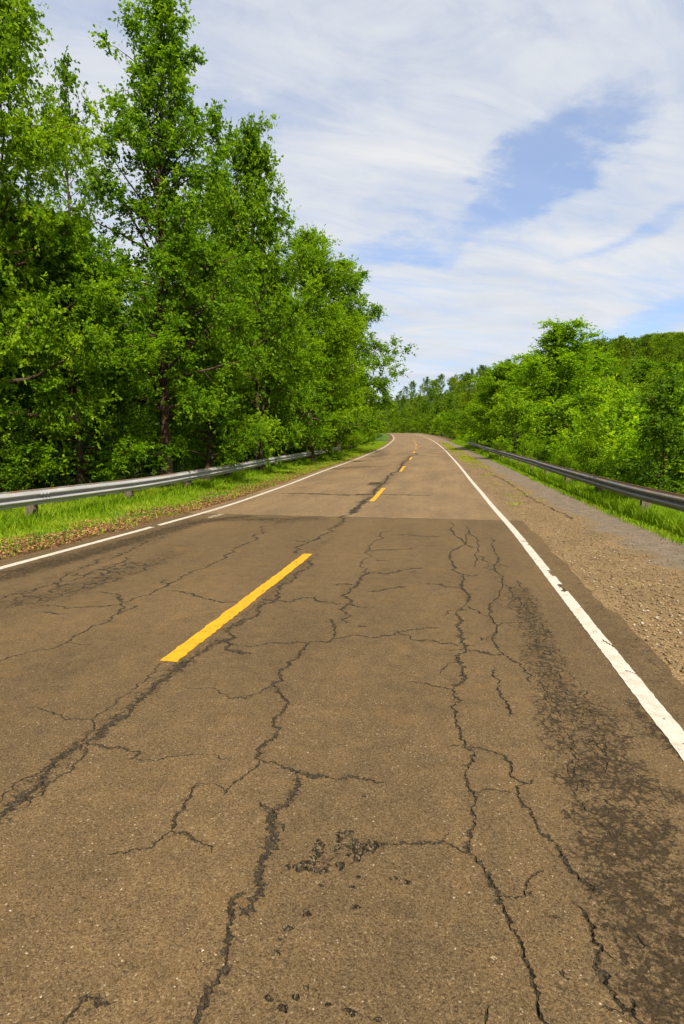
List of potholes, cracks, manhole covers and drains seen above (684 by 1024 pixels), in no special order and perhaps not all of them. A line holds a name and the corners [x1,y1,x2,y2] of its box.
pothole [285,830,380,874]
crack [62,992,114,1024]
crack [108,523,645,1024]
crack [0,519,287,661]
